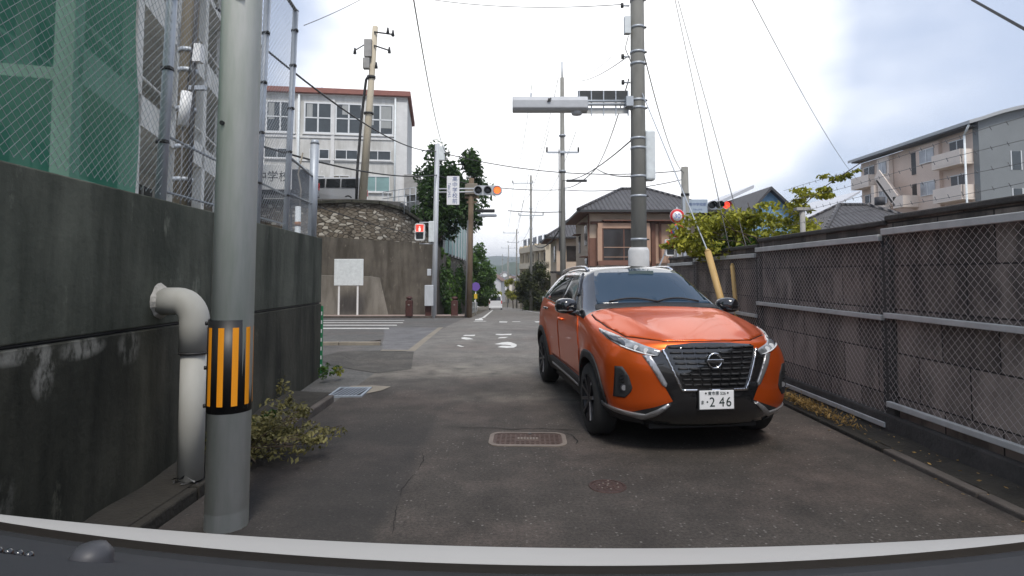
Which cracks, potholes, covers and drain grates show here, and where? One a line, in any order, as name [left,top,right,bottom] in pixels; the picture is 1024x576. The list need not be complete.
drain grate [329,385,391,398]
manhole cover [588,479,627,494]
crack [465,427,587,443]
manhole cover [488,432,567,447]
